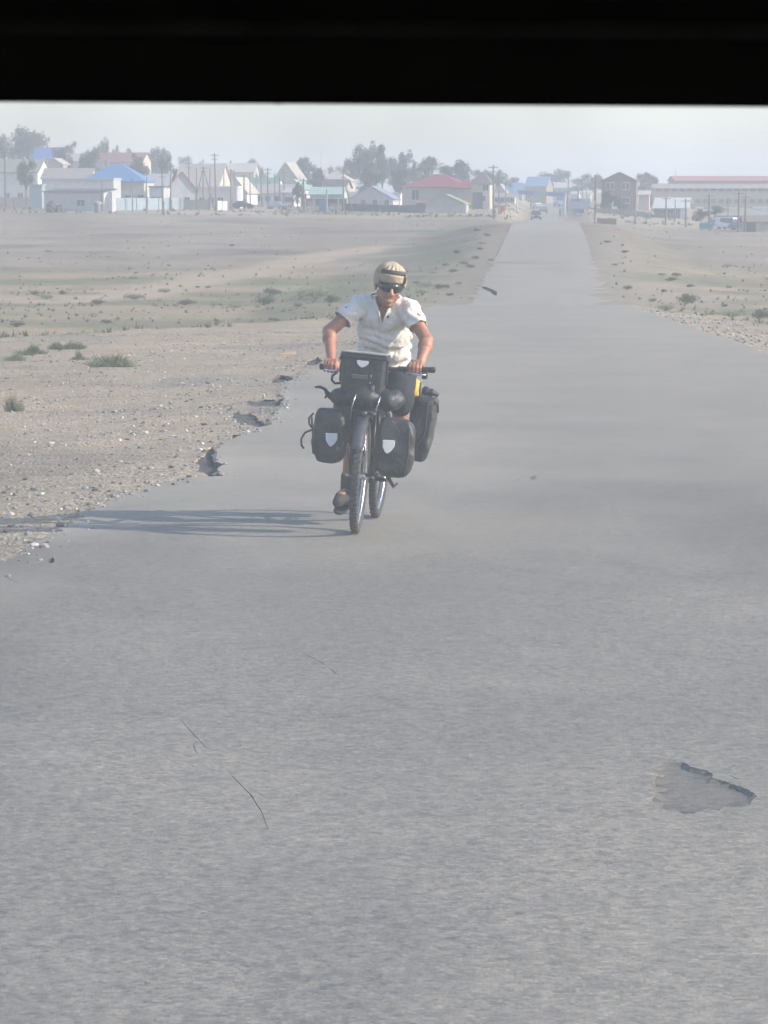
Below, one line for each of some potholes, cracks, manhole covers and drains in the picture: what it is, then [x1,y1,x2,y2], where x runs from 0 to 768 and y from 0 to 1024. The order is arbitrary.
pothole [233,413,264,427]
crack [181,720,269,828]
pothole [194,449,223,477]
pothole [648,763,757,814]
